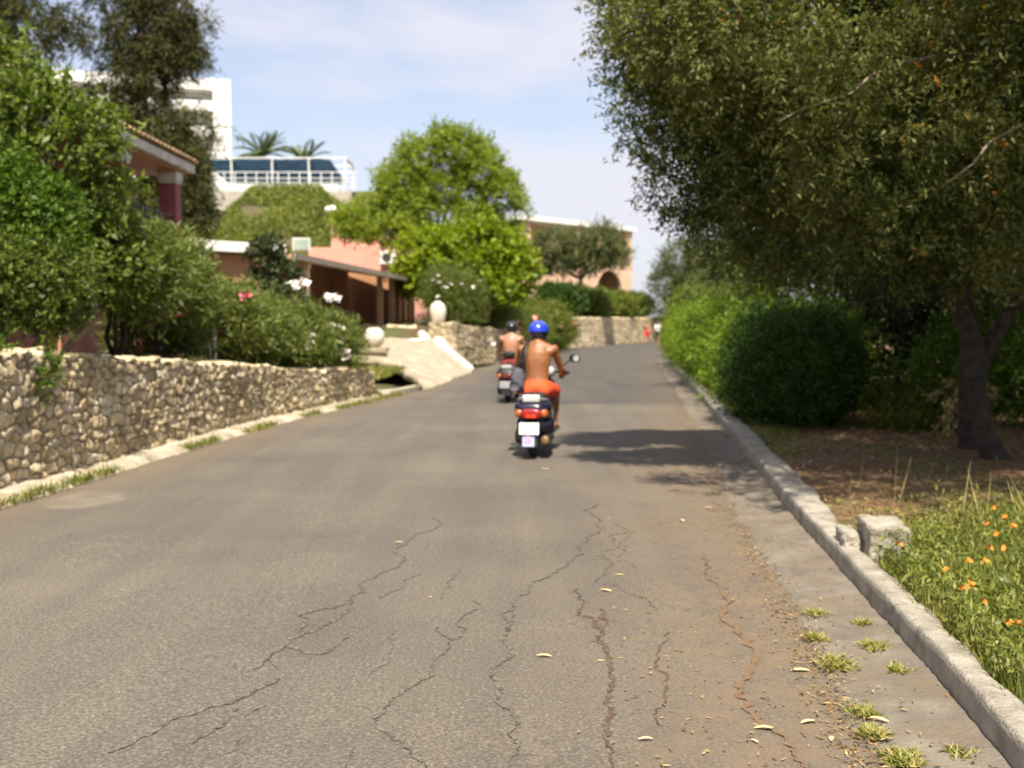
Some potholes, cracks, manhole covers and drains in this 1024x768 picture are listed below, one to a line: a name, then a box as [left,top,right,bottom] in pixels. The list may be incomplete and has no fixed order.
crack [489,502,657,768]
crack [702,552,805,768]
crack [653,632,670,726]
crack [107,518,482,768]
